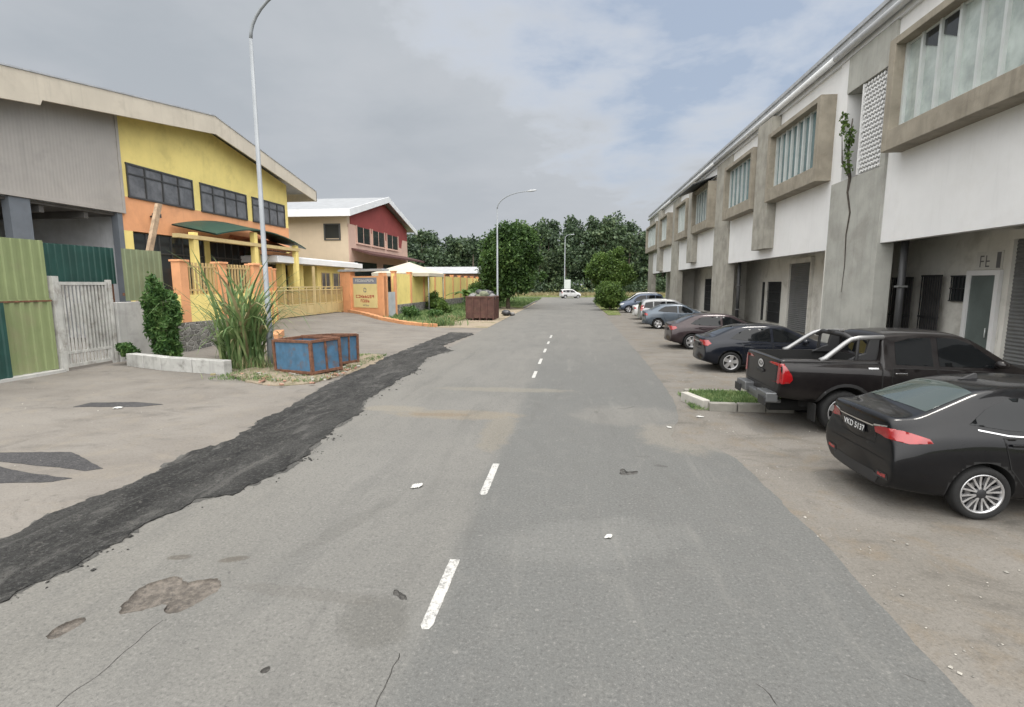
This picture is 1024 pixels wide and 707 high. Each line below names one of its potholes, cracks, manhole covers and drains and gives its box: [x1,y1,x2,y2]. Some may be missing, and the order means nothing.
pothole [119,576,222,614]
crack [56,620,163,707]
pothole [46,617,86,639]
